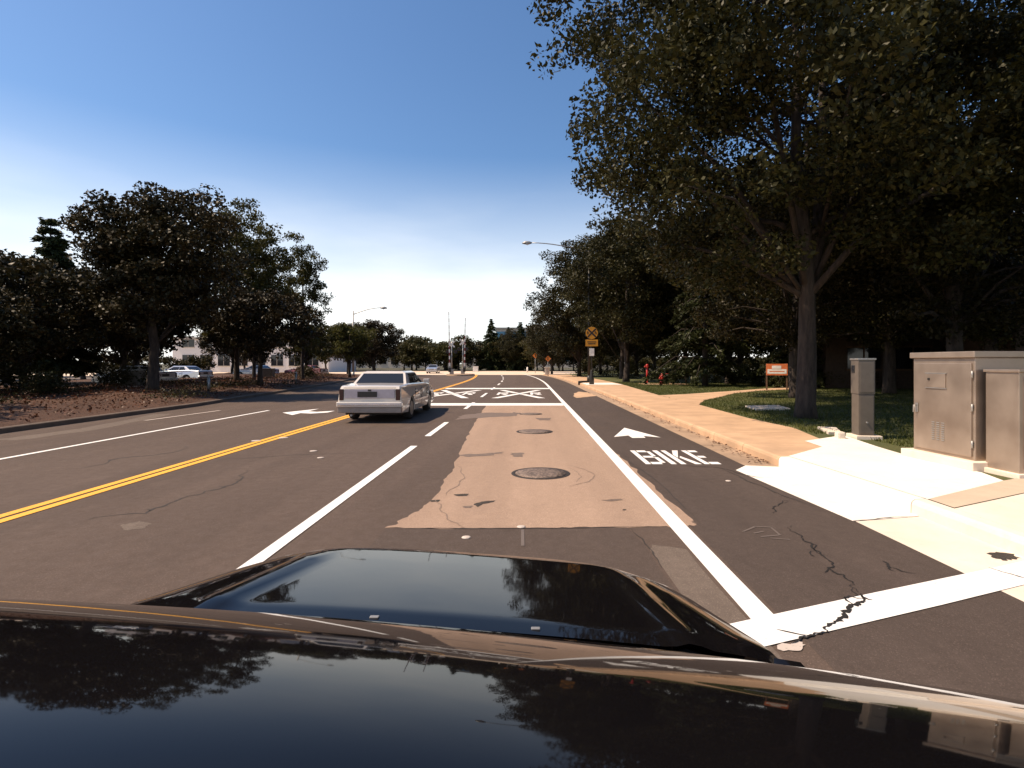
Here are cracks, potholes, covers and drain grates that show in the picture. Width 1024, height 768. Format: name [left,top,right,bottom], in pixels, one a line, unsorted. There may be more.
crack [88,453,337,520]
crack [675,463,872,643]
pothole [987,552,1019,560]
manhole cover [511,467,570,480]
